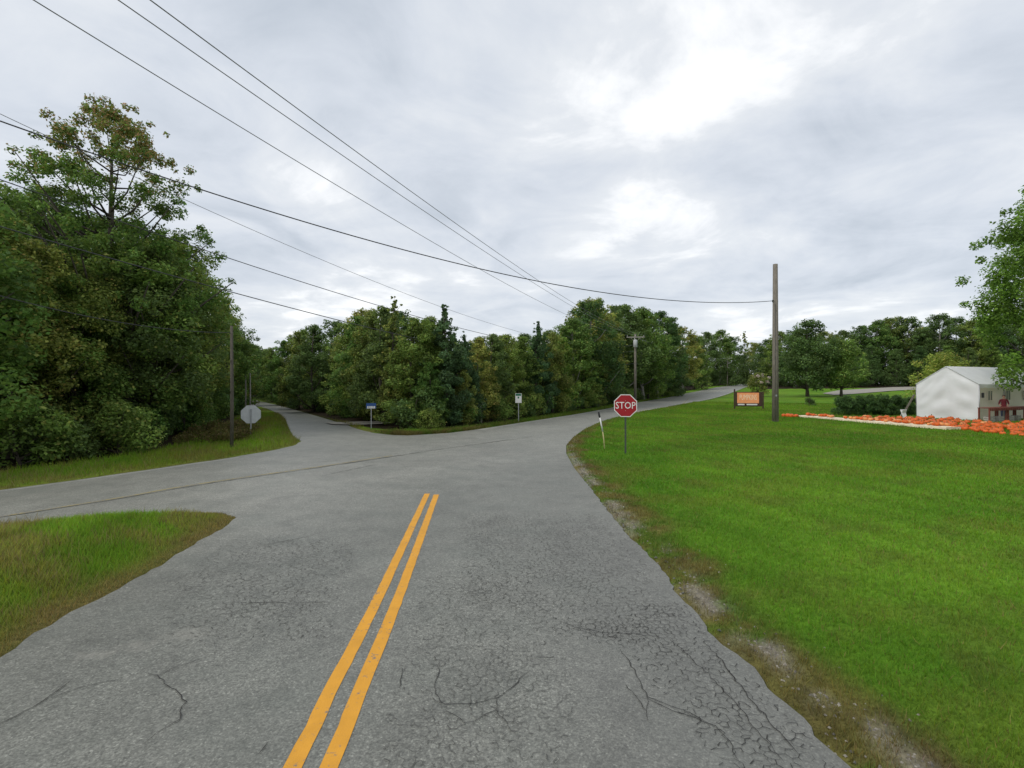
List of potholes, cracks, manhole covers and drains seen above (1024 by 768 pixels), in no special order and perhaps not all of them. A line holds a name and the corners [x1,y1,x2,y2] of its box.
crack [1,679,119,723]
crack [383,513,835,768]
crack [144,660,196,743]
